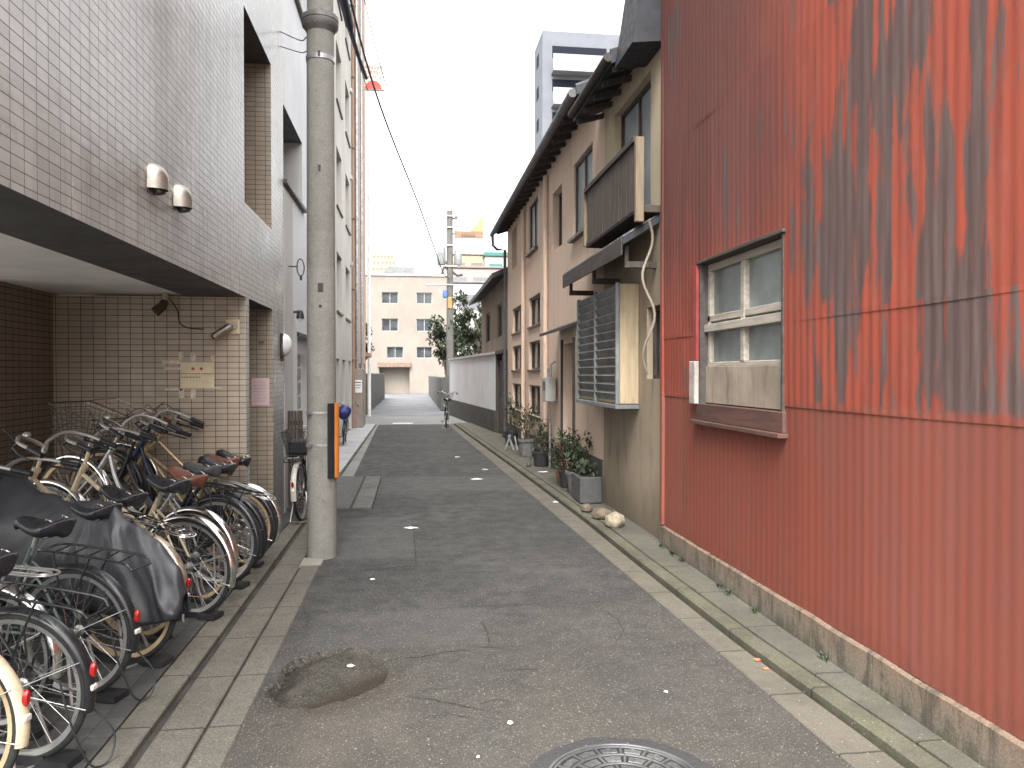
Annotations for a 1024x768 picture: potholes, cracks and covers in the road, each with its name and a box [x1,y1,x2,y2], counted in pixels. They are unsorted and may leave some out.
crack [399,601,585,659]
crack [416,688,500,719]
pothole [266,648,389,709]
crack [351,513,423,572]
manhole cover [549,743,694,768]
